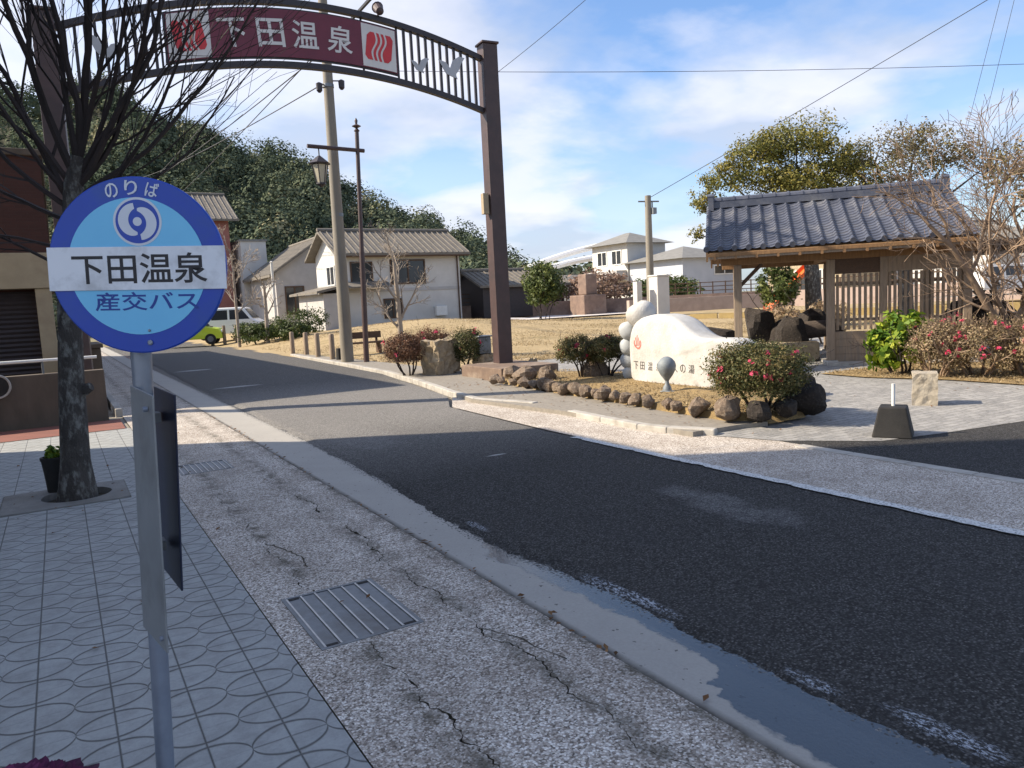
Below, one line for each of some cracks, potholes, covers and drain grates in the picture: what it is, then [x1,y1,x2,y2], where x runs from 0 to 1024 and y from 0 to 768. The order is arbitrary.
crack [215,495,315,592]
crack [266,479,695,768]
